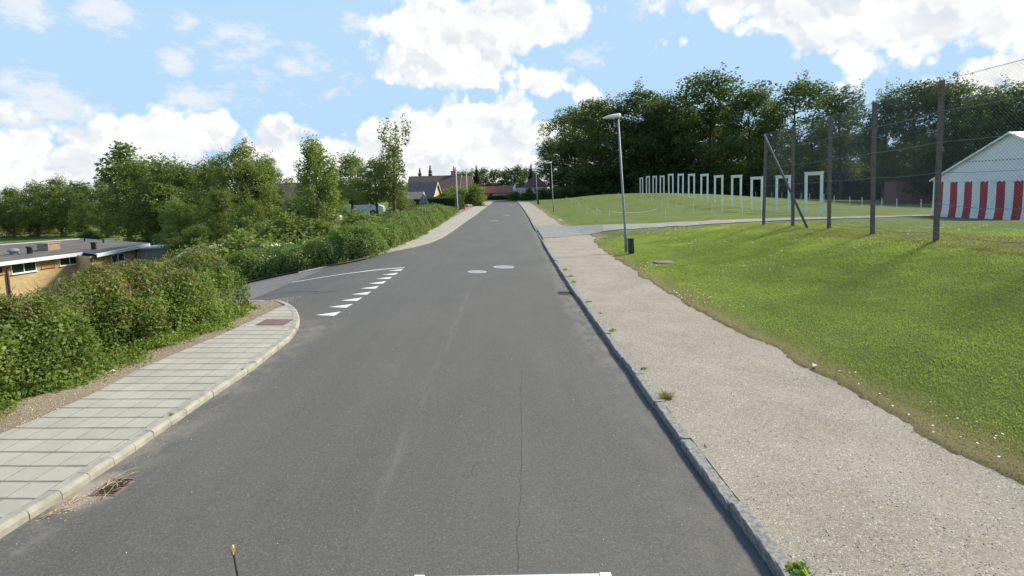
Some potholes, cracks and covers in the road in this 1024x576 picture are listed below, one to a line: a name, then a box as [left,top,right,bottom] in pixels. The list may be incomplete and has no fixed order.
drain grate [88,478,137,496]
